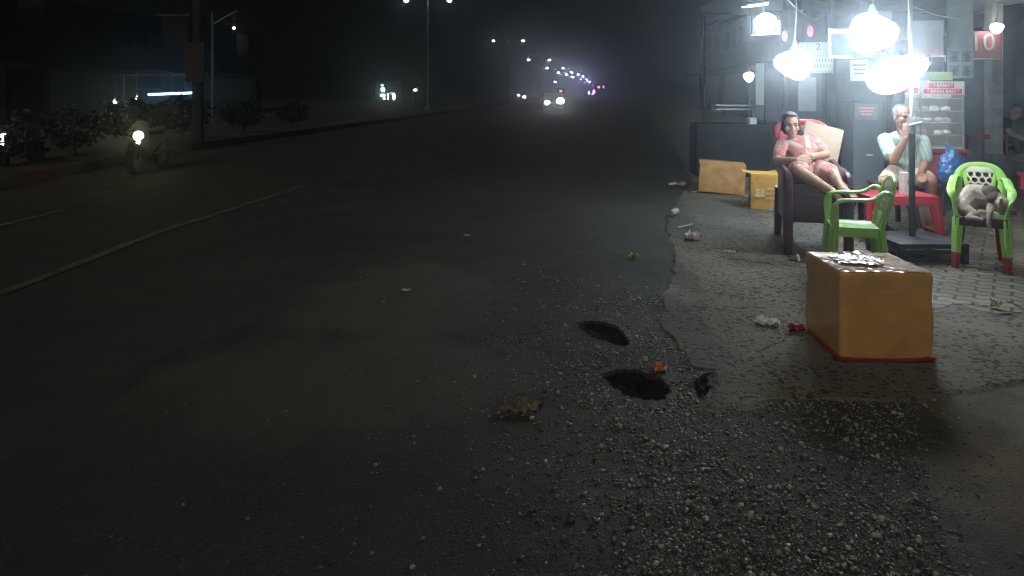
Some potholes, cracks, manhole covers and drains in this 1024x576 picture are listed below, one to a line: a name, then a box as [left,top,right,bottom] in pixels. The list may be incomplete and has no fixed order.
pothole [592,365,680,407]
pothole [685,371,717,406]
pothole [570,318,636,350]
